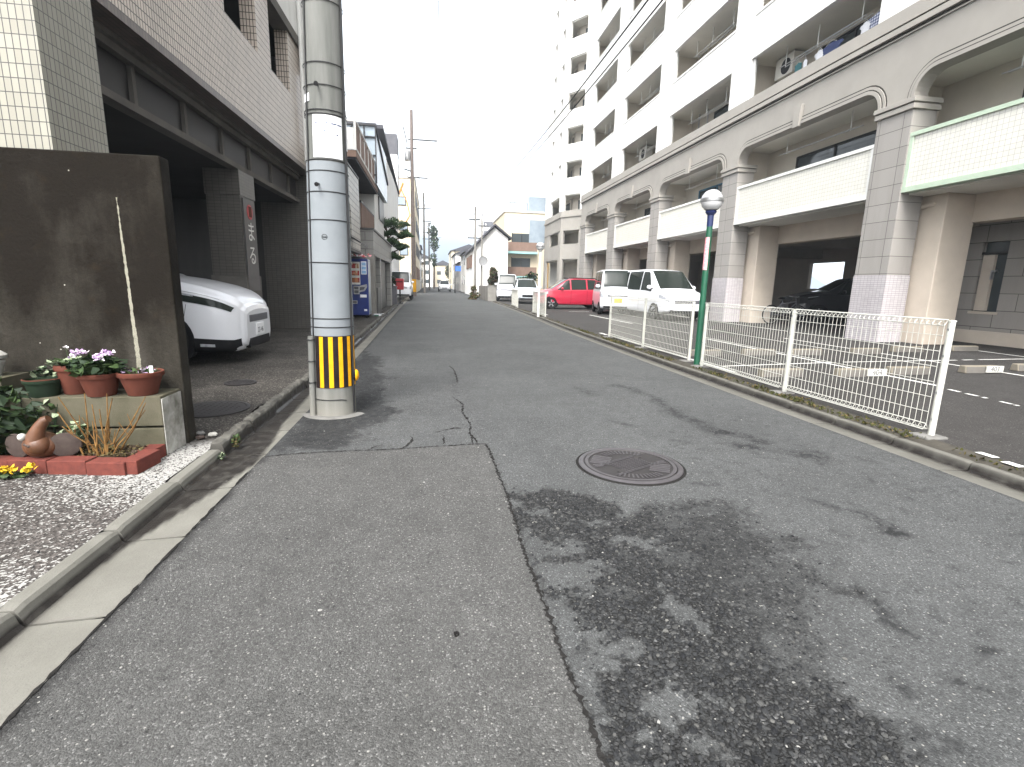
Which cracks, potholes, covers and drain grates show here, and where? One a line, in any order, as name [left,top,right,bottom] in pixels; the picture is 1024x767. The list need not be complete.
manhole cover [576,448,687,486]
manhole cover [193,401,250,418]
crack [438,366,481,444]
